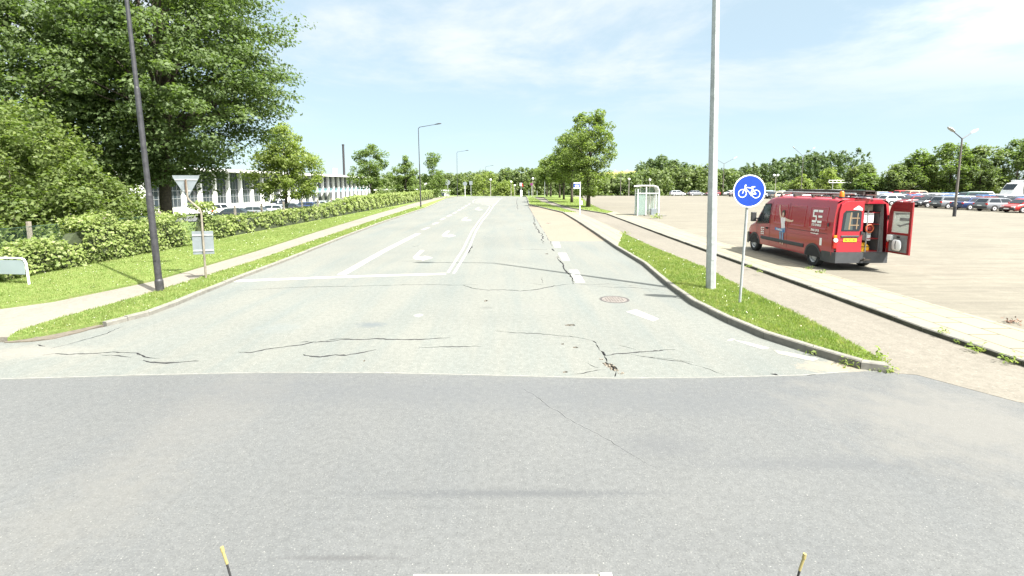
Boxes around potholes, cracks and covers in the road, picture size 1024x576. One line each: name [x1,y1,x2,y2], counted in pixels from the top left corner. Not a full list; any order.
crack [501,331,721,376]
crack [37,328,191,364]
crack [240,337,472,357]
